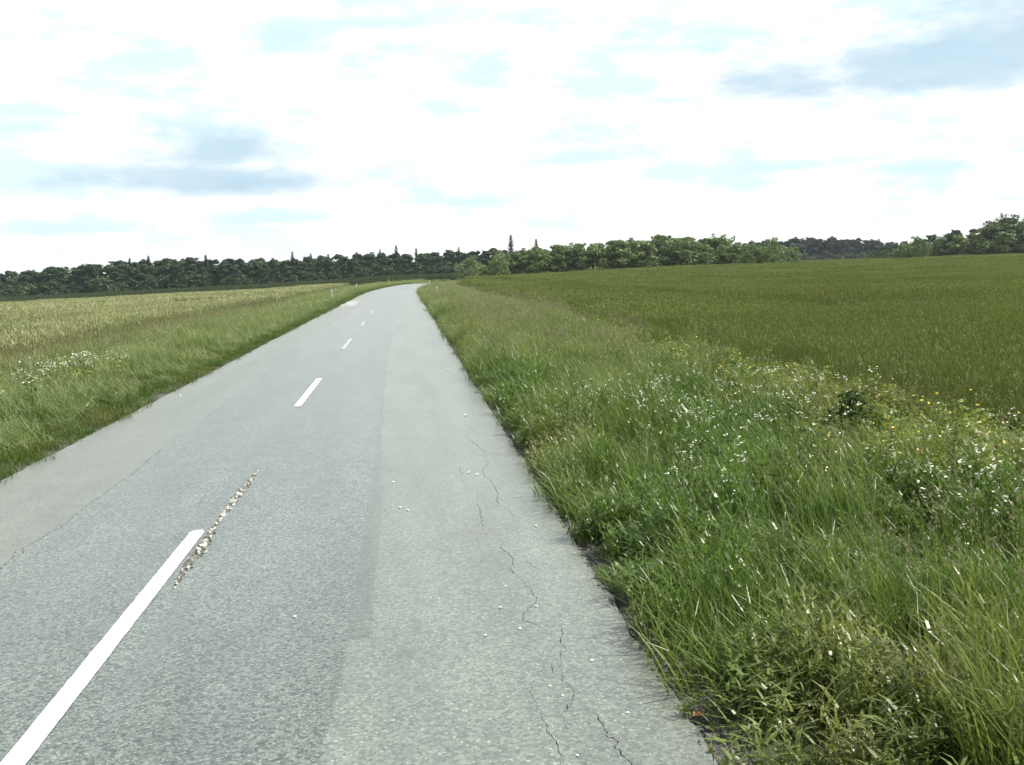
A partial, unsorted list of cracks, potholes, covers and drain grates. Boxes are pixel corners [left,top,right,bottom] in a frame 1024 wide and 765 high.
crack [529,625,575,765]
crack [596,714,632,765]
crack [501,548,555,633]
